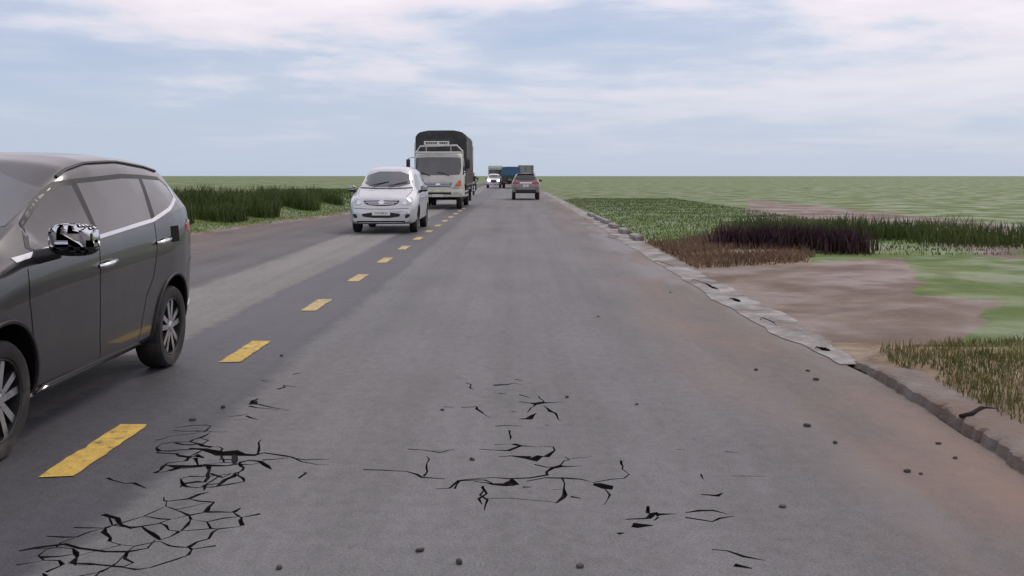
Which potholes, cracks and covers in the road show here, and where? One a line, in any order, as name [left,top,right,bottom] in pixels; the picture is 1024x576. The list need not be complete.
crack [16,373,329,576]
crack [363,379,765,569]
